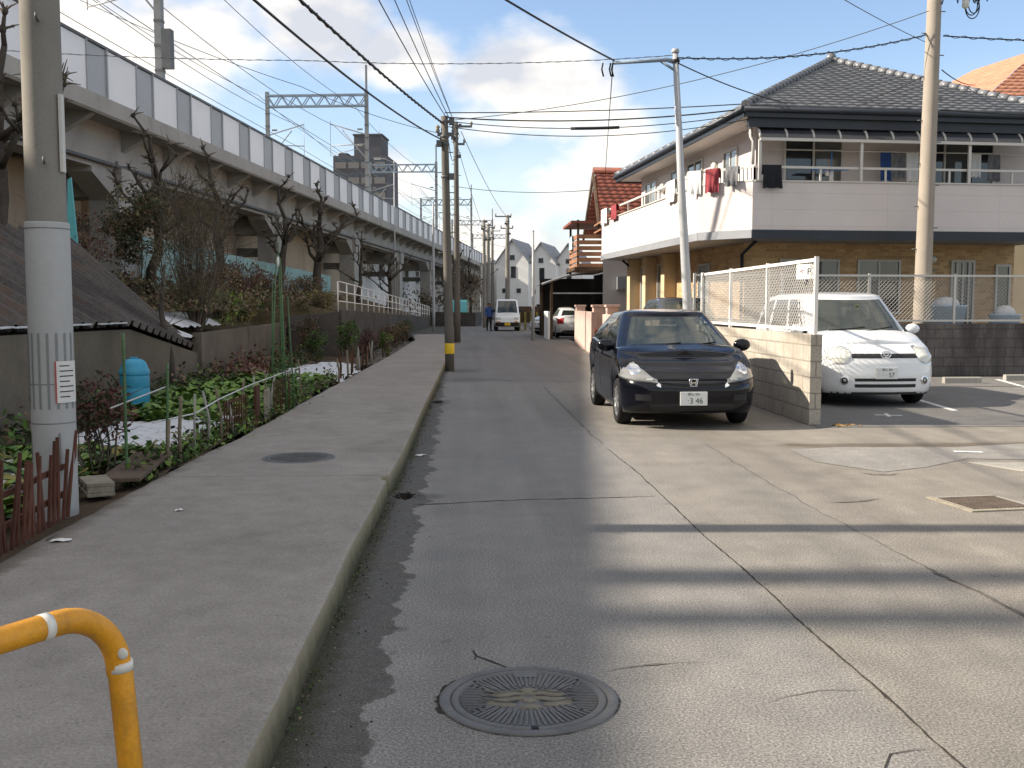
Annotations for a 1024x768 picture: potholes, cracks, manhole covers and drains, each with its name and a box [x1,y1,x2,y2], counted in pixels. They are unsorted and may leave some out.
pothole [392,492,416,500]
crack [435,650,620,737]
manhole cover [262,452,335,463]
crack [597,662,677,673]
crack [884,748,942,768]
manhole cover [439,666,619,737]
